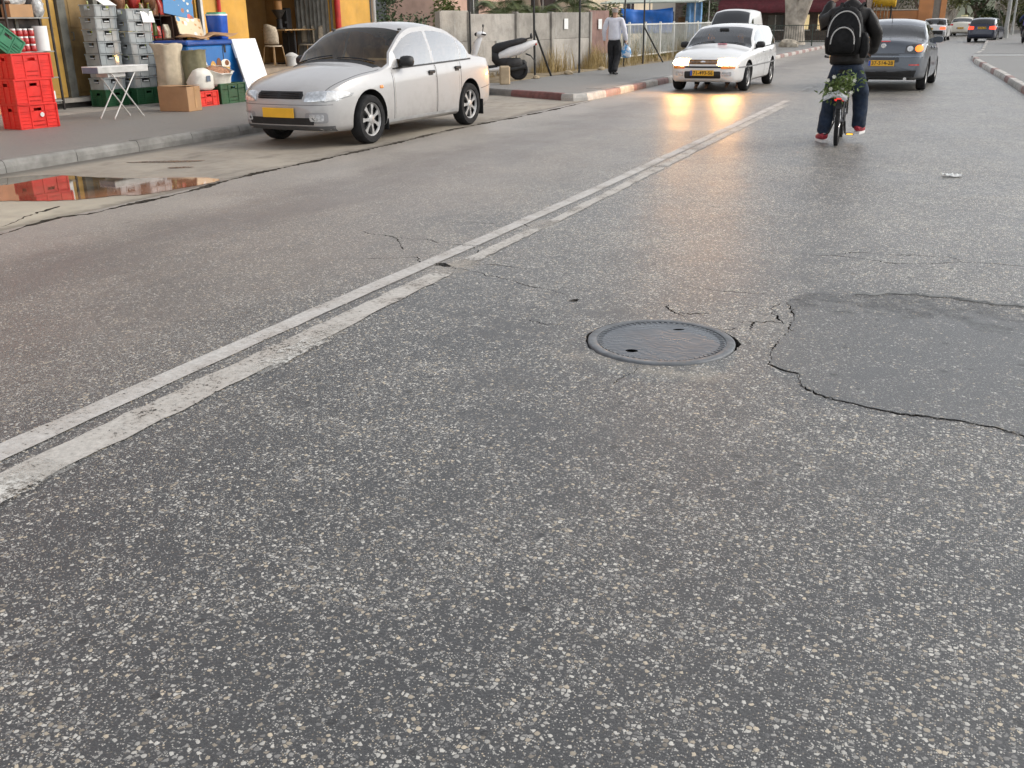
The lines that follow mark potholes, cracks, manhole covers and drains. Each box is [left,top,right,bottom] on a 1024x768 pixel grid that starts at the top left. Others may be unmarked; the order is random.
manhole cover [588,319,736,366]
crack [359,230,563,294]
crack [809,252,1018,266]
crack [665,286,1024,437]
